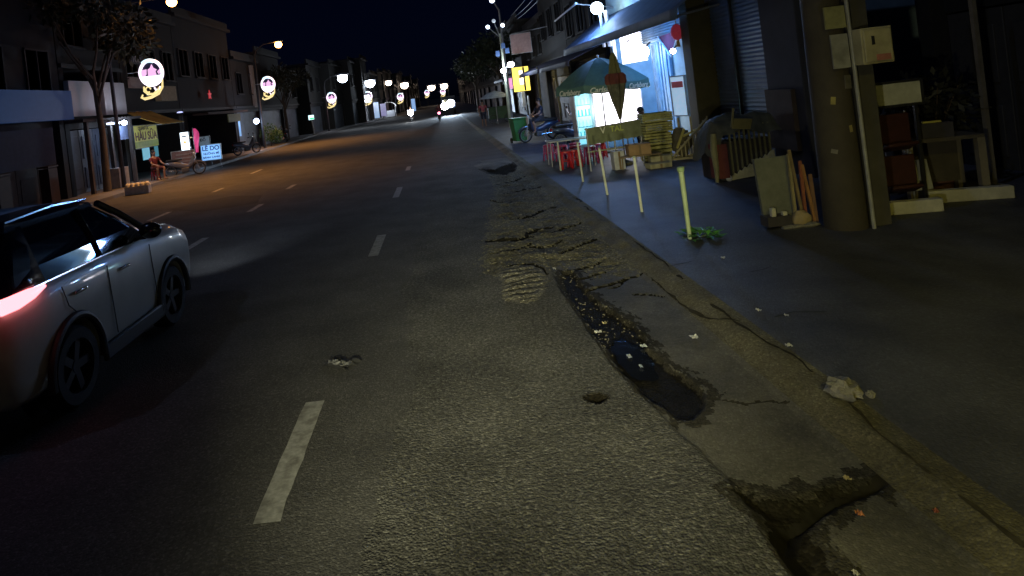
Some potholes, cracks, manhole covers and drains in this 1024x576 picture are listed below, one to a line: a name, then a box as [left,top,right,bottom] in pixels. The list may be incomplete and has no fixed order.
pothole [554,269,726,430]
pothole [479,162,518,175]
pothole [712,462,898,576]
crack [711,398,790,406]
crack [485,176,739,321]
